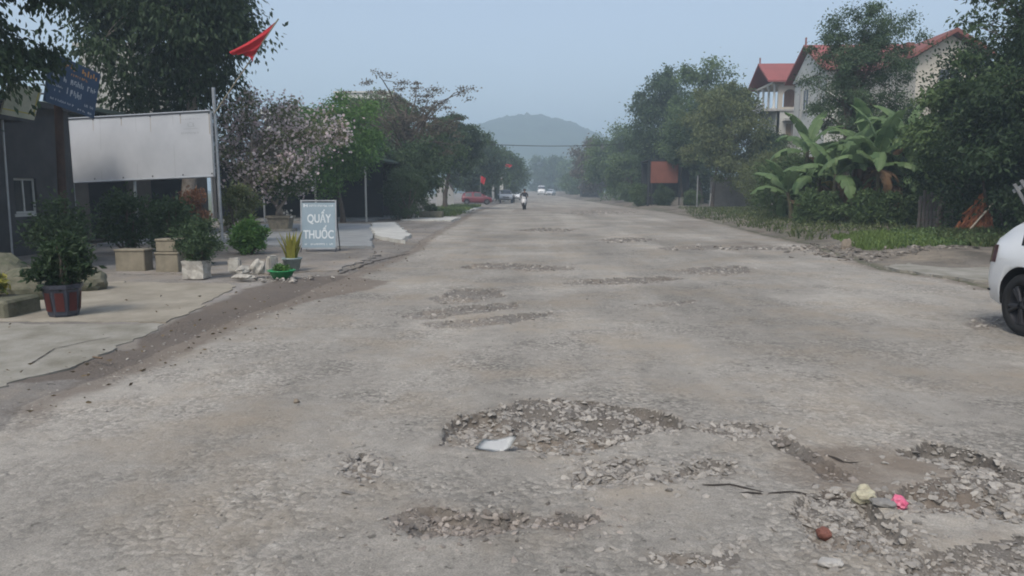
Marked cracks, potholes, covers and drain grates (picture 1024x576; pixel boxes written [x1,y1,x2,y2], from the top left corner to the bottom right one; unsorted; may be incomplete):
pothole [562,275,684,286]
pothole [429,288,521,305]
pothole [421,311,558,332]
pothole [635,453,766,498]
crack [339,254,406,274]
pothole [457,262,575,272]
pothole [664,265,755,276]
pothole [828,434,1024,533]
pothole [401,301,523,320]
pothole [875,520,1024,576]
